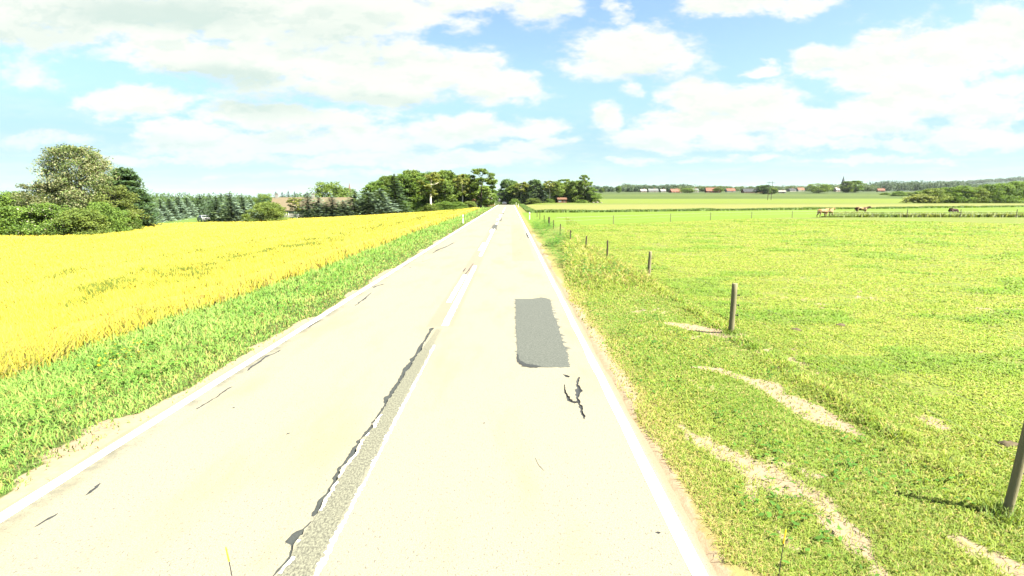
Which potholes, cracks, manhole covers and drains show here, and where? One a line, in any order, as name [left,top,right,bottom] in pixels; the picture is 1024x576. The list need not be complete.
crack [196,350,280,409]
crack [563,374,585,419]
